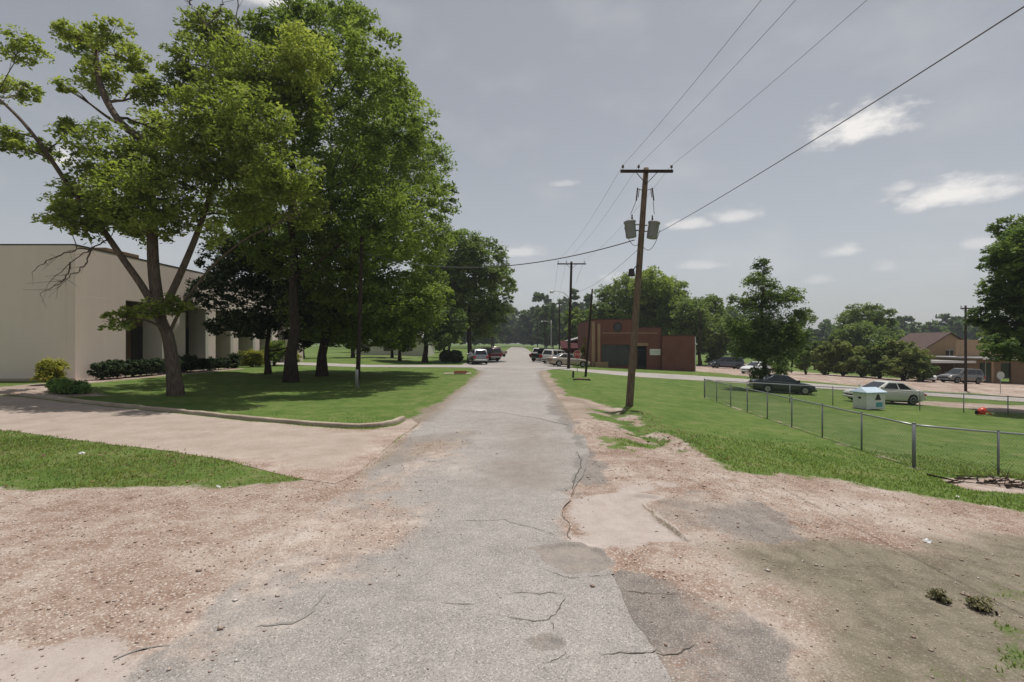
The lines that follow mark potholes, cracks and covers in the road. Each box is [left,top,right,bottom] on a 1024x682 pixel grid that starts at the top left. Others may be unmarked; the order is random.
crack [256,596,324,627]
crack [503,592,565,629]
crack [605,644,701,655]
crack [114,645,164,660]
